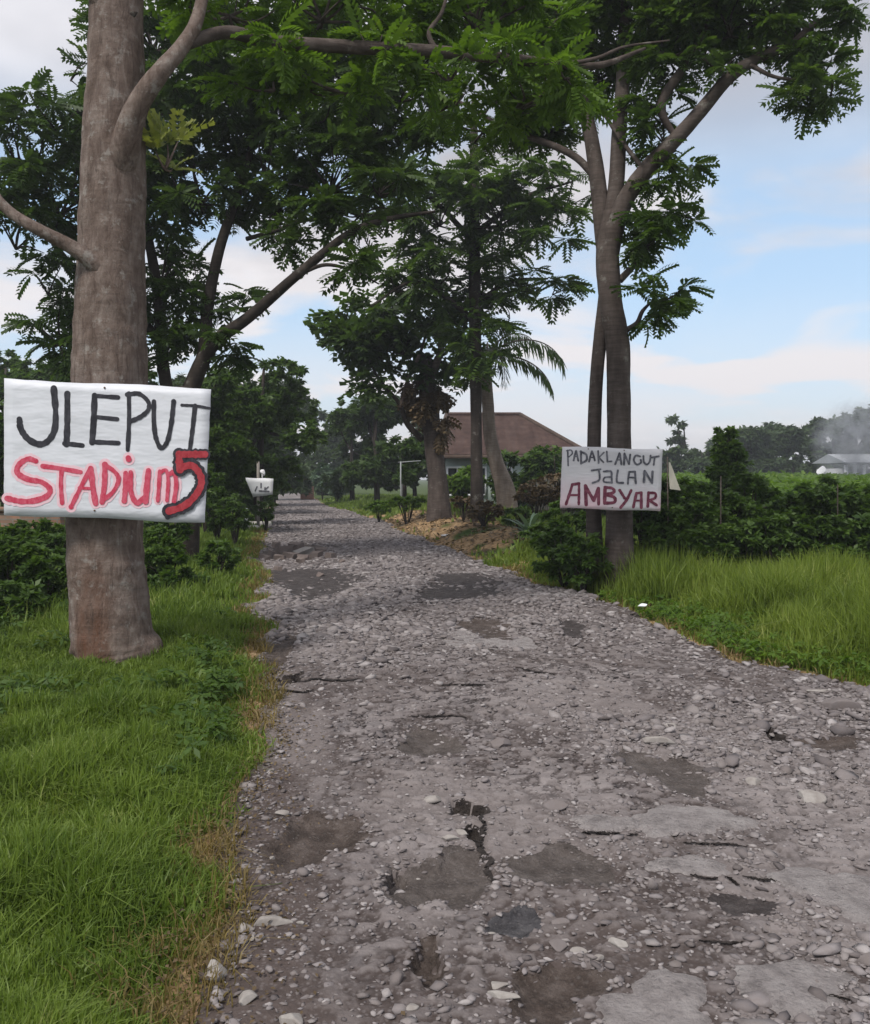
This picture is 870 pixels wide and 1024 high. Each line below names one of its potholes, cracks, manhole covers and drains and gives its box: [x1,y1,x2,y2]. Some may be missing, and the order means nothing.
pothole [449,799,491,817]
pothole [396,723,468,757]
pothole [407,934,446,989]
crack [258,678,360,693]
pothole [255,810,373,876]
pothole [413,573,514,602]
pothole [707,893,777,916]
pothole [259,567,368,601]
pothole [494,842,625,889]
pothole [613,748,712,800]
pothole [384,845,495,910]
